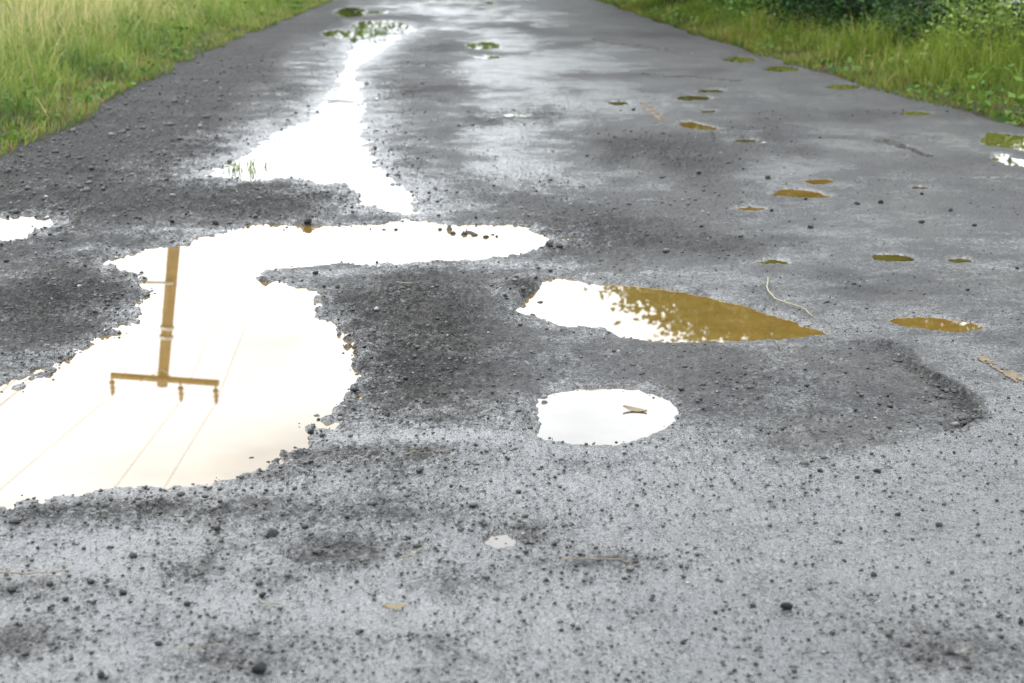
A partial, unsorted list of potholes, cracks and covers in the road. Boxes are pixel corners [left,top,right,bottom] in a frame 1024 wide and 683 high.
crack [873,138,934,157]
pothole [500,270,849,344]
pothole [876,310,1003,335]
pothole [518,377,700,446]
pothole [762,185,840,198]
